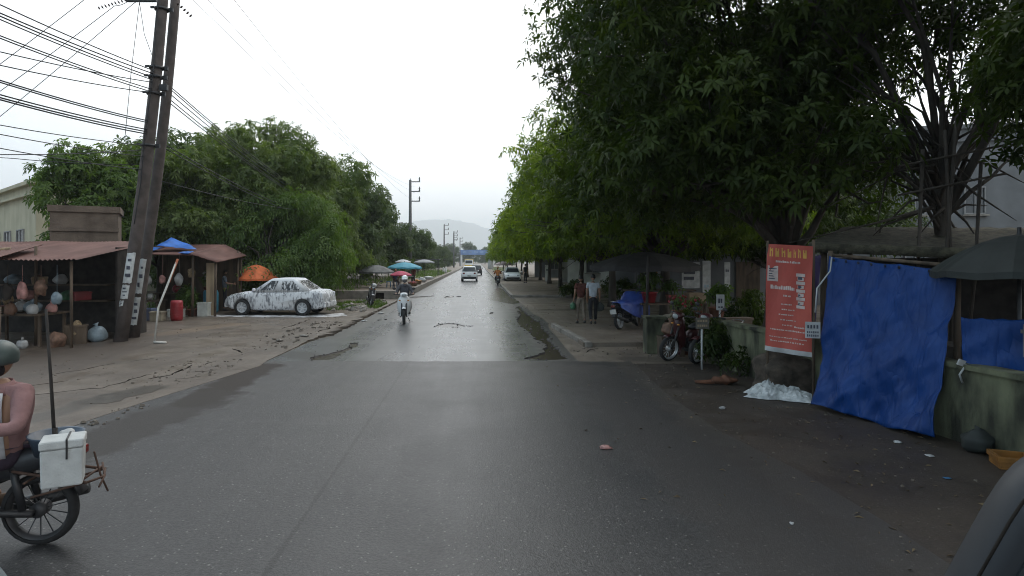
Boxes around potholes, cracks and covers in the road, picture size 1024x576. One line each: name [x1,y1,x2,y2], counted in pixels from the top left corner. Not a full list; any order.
crack [32,358,216,395]
pothole [309,343,358,360]
